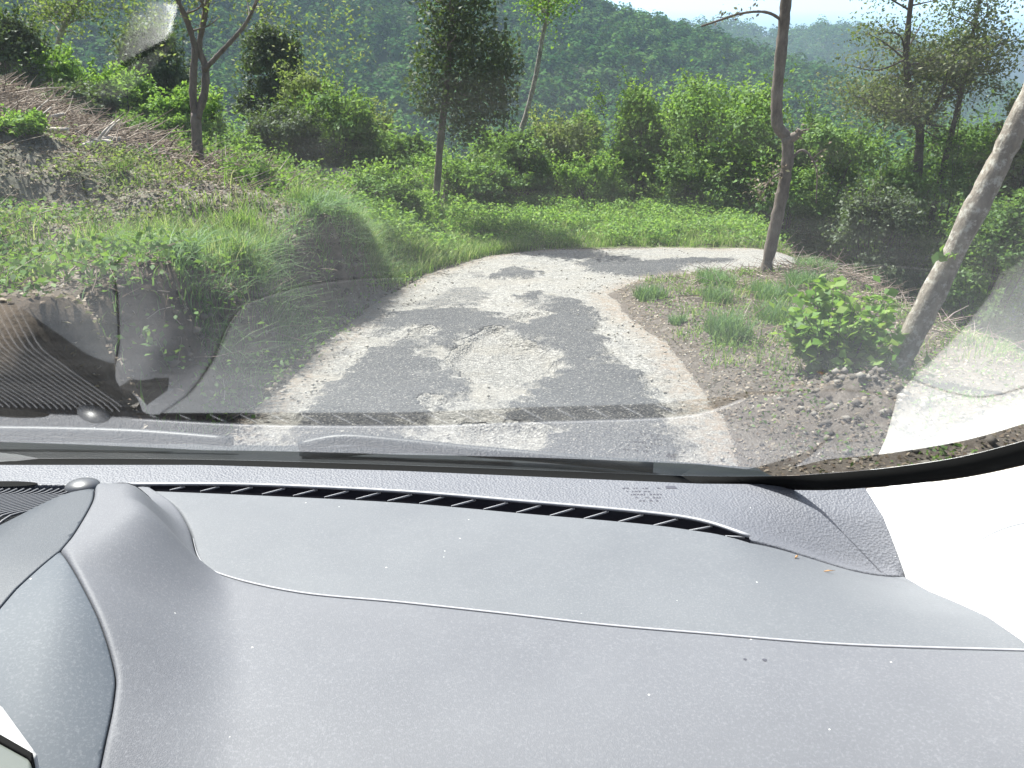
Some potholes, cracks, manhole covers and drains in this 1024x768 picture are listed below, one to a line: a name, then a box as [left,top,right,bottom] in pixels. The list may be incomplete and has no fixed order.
pothole [444,325,559,389]
